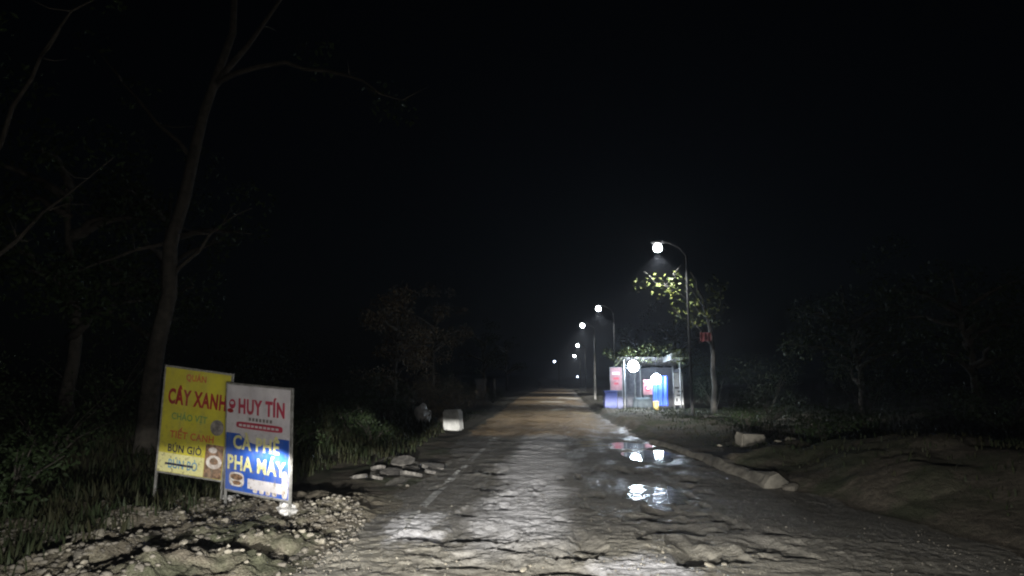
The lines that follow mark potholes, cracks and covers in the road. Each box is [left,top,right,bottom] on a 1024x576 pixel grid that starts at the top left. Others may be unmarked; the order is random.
pothole [668,534,756,568]
